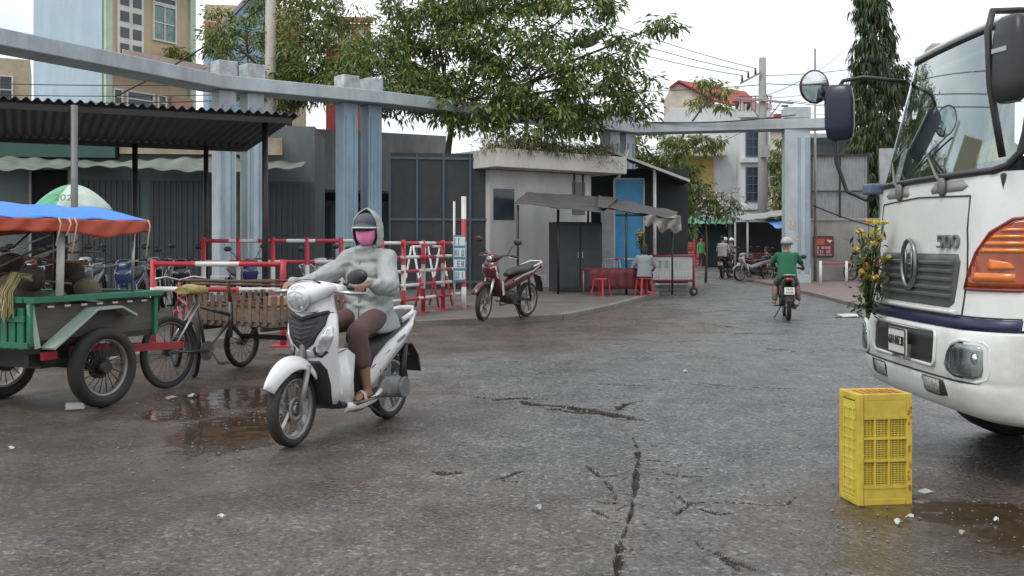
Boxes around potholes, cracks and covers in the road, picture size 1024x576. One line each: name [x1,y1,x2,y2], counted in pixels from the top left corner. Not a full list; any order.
crack [572,464,814,576]
crack [474,469,539,487]
